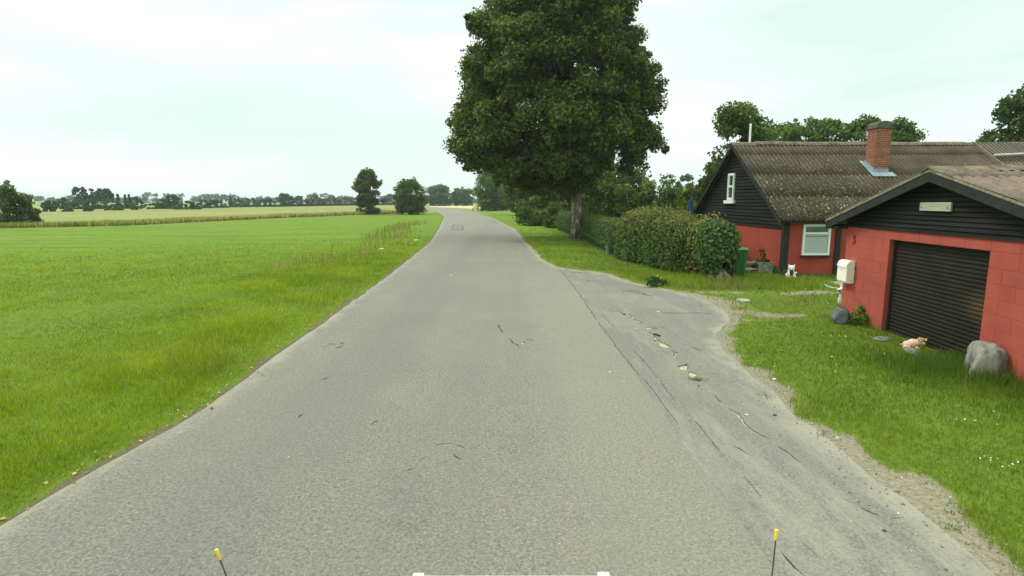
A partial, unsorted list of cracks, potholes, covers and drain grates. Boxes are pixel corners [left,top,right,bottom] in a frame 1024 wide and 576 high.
crack [565,276,799,461]
crack [743,476,819,576]
